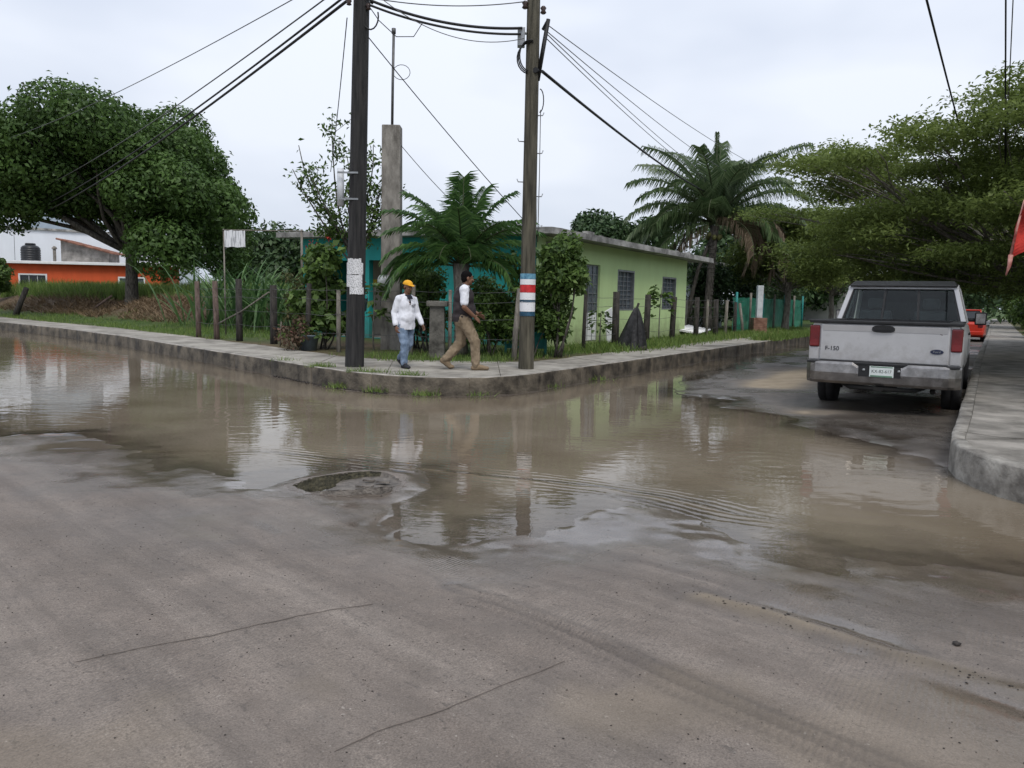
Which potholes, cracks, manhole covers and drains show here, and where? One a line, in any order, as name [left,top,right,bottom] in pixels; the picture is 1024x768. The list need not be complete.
crack [76,604,371,662]
crack [336,661,564,751]
pothole [287,471,408,497]
